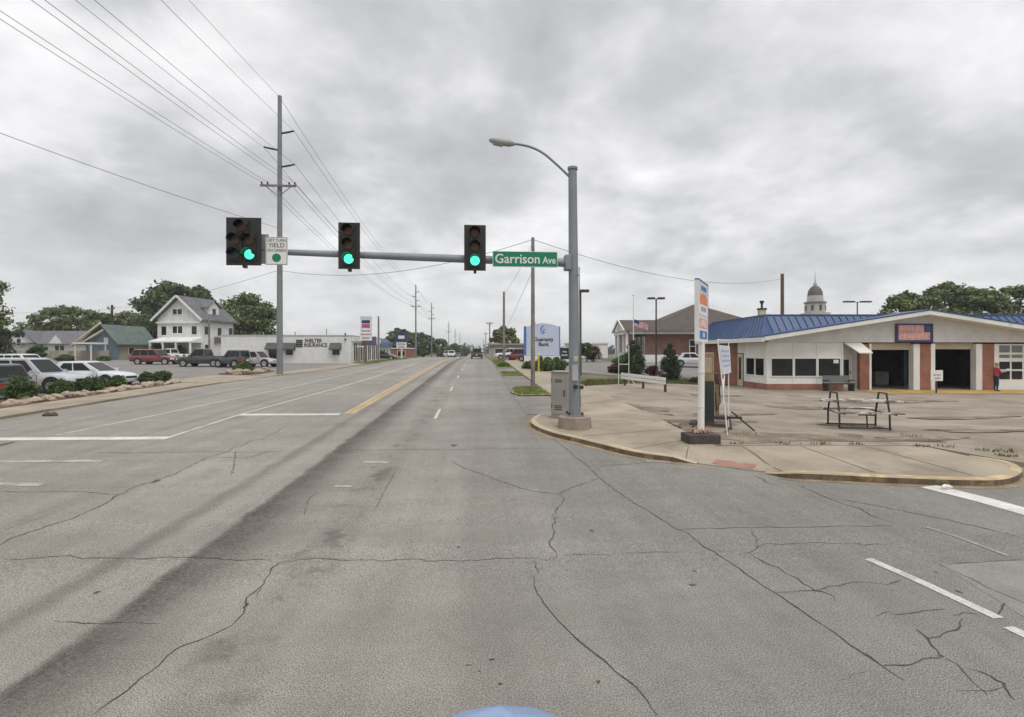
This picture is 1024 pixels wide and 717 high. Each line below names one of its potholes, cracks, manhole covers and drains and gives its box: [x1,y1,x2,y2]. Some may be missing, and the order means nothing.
crack [745,531,900,601]
crack [859,609,1015,700]
crack [0,428,282,543]
crack [27,462,657,715]
